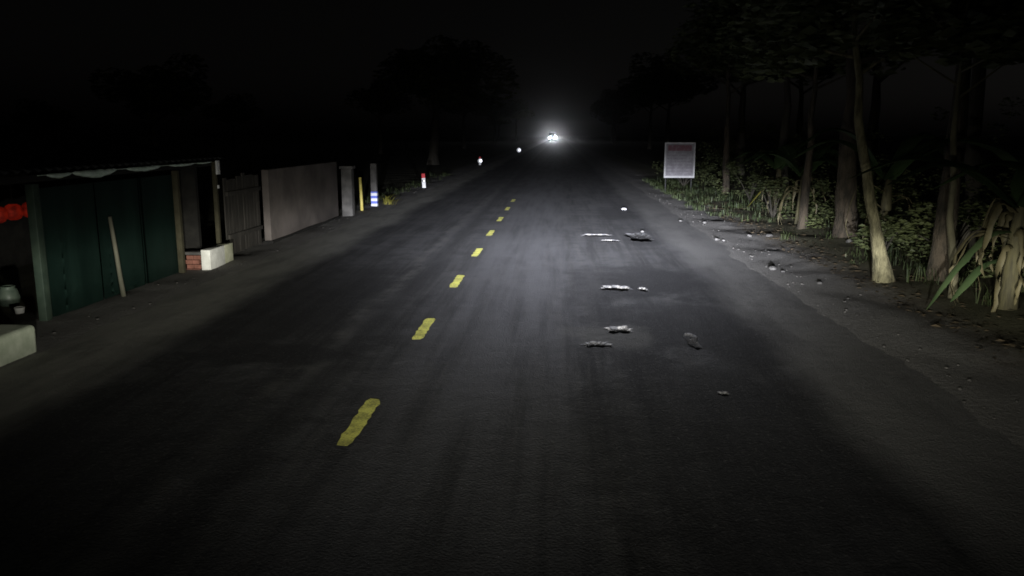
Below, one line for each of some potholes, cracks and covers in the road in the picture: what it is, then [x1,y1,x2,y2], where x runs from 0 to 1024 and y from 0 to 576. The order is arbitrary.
pothole [624,233,654,242]
pothole [603,325,633,334]
pothole [683,332,703,350]
